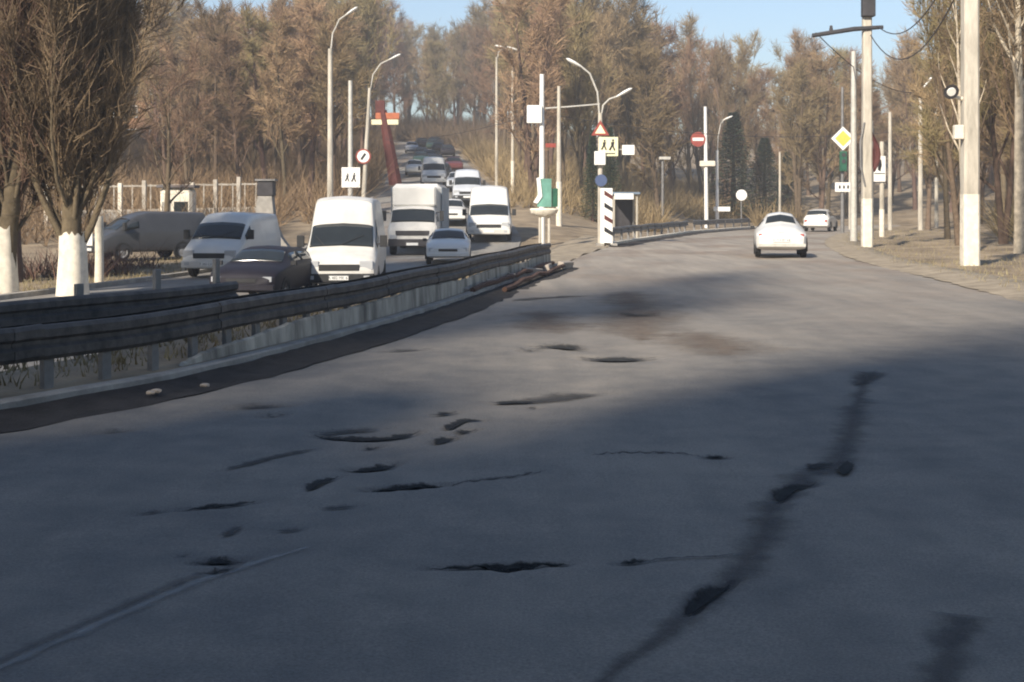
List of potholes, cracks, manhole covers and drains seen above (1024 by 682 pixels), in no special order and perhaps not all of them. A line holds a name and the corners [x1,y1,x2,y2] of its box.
pothole [520,394,595,403]
crack [619,553,736,564]
pothole [348,464,396,473]
pothole [306,476,338,490]
pothole [364,482,440,492]
pothole [444,418,480,430]
pothole [317,432,417,442]
pothole [197,556,236,565]
